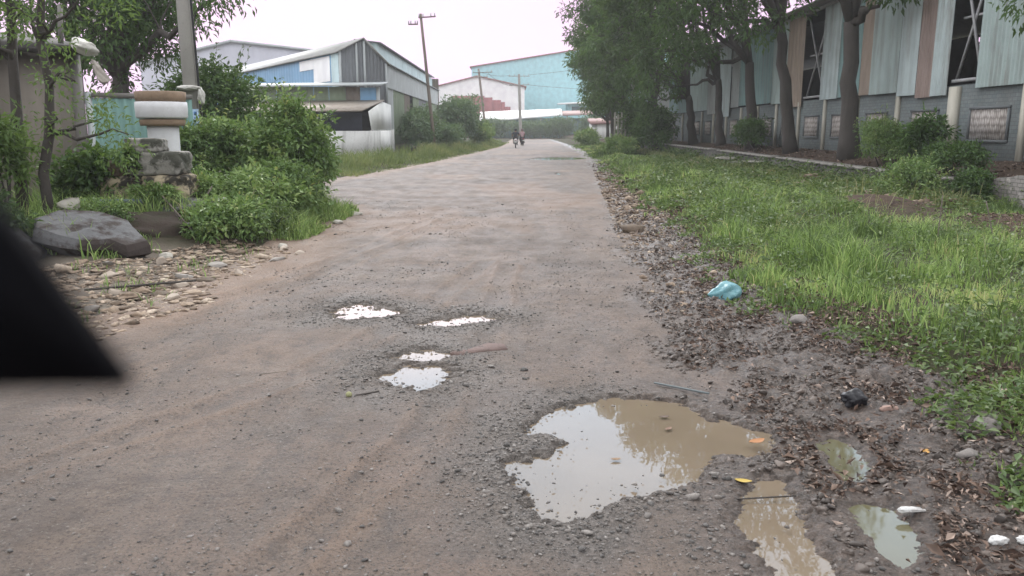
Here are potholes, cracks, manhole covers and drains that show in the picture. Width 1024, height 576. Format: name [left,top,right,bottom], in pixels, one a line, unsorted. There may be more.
pothole [348,360,482,397]
pothole [795,425,901,492]
pothole [366,341,470,367]
pothole [314,298,419,323]
pothole [706,461,878,576]
pothole [822,488,964,576]
pothole [401,309,518,330]
pothole [481,390,798,534]
